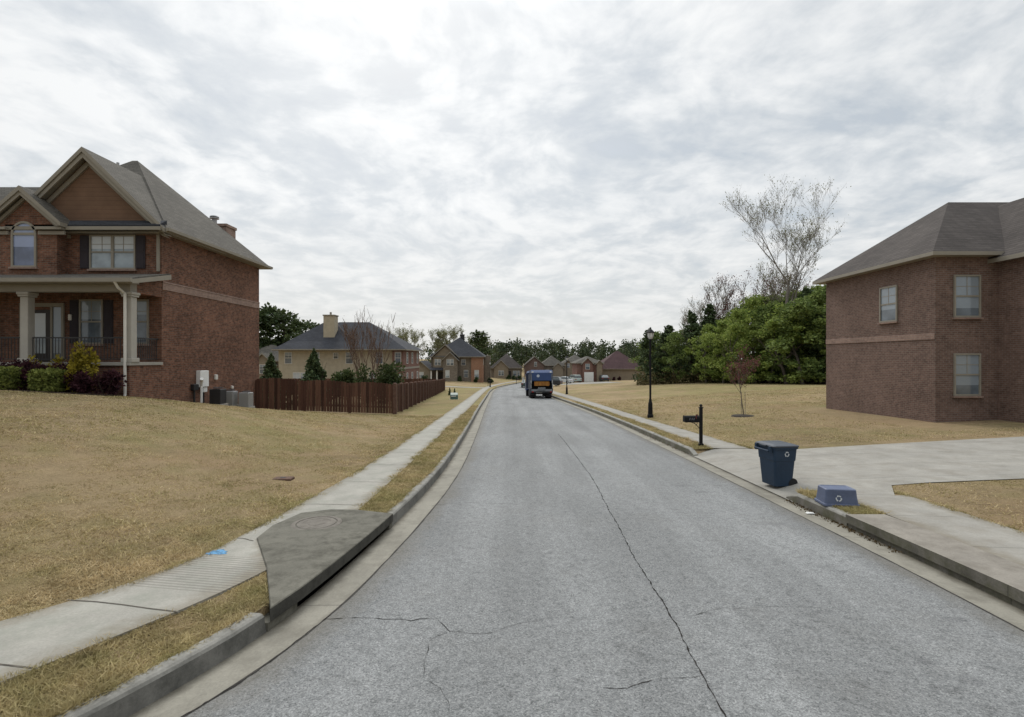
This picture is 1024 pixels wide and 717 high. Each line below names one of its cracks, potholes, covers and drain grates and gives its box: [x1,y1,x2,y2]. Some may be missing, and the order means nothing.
crack [558,434,814,717]
drain grate [257,509,393,632]
crack [181,615,551,717]
